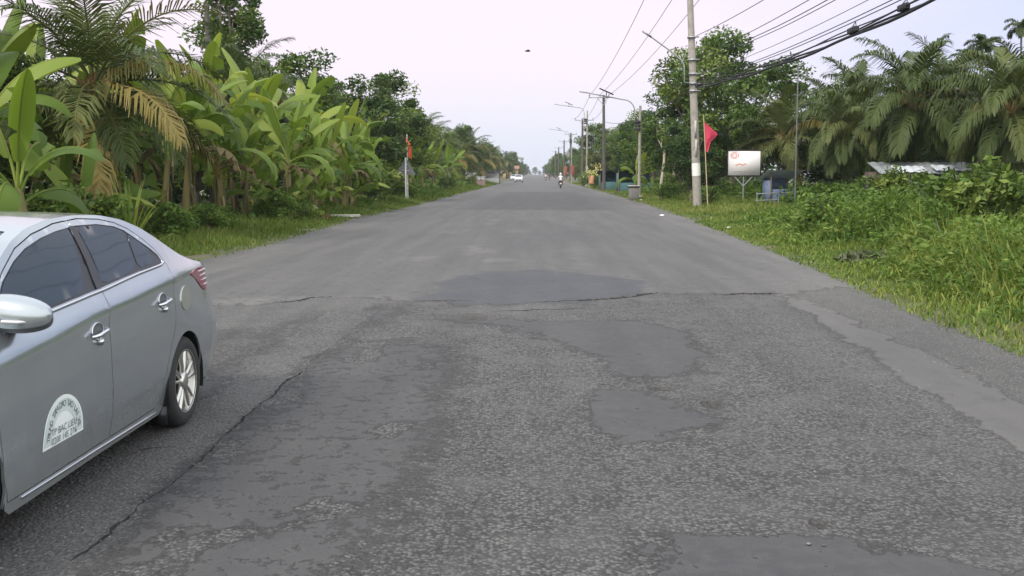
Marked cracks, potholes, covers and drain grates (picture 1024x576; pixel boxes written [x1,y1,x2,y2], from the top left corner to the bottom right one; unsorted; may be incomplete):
crack [494,292,658,312]
crack [71,337,345,561]
